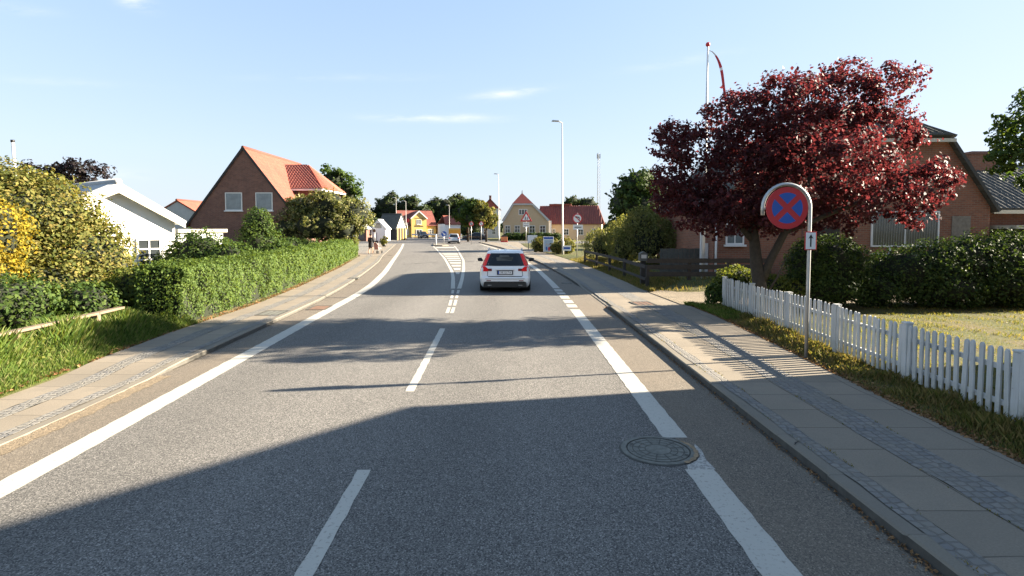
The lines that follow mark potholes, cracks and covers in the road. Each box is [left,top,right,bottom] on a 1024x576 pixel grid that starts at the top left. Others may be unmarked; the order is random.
manhole cover [619,436,699,466]
